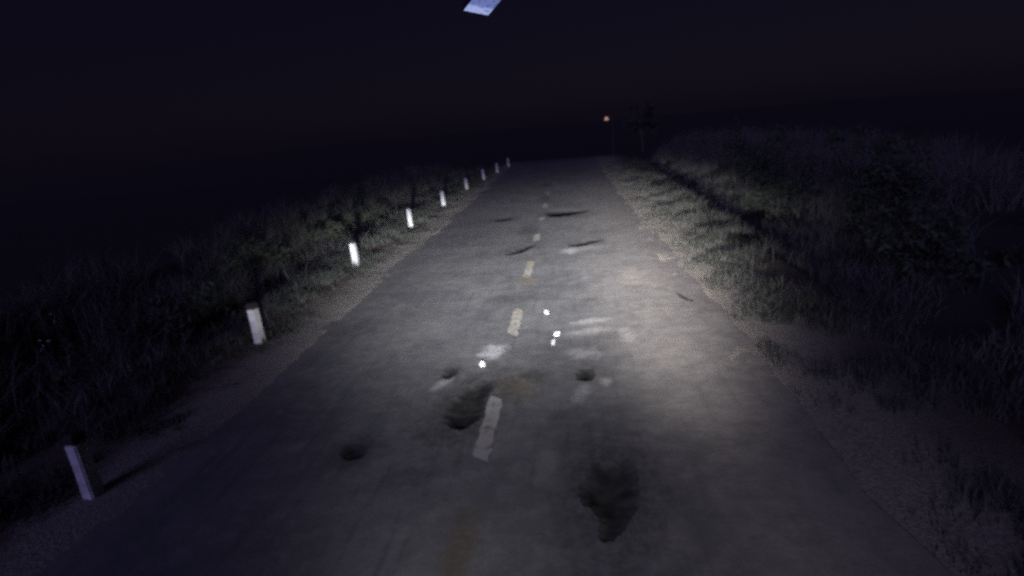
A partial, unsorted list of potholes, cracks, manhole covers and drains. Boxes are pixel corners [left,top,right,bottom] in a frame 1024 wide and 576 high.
pothole [441,365,459,380]
pothole [575,366,596,382]
pothole [505,244,536,255]
pothole [568,239,604,247]
pothole [339,440,369,461]
pothole [443,376,495,430]
pothole [576,456,641,543]
